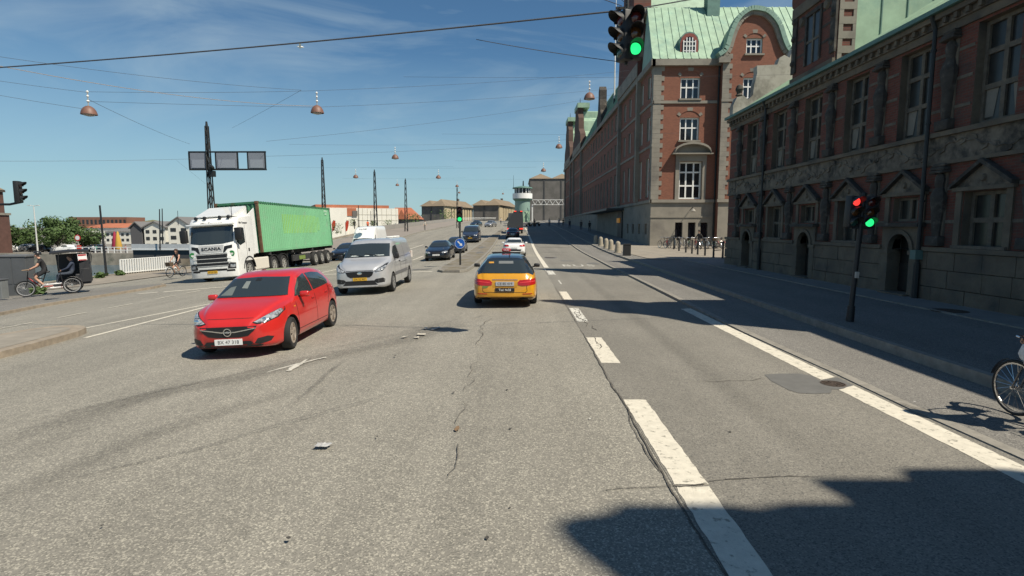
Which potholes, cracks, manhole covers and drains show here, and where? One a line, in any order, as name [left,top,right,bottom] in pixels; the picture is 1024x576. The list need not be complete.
crack [601,409,823,491]
